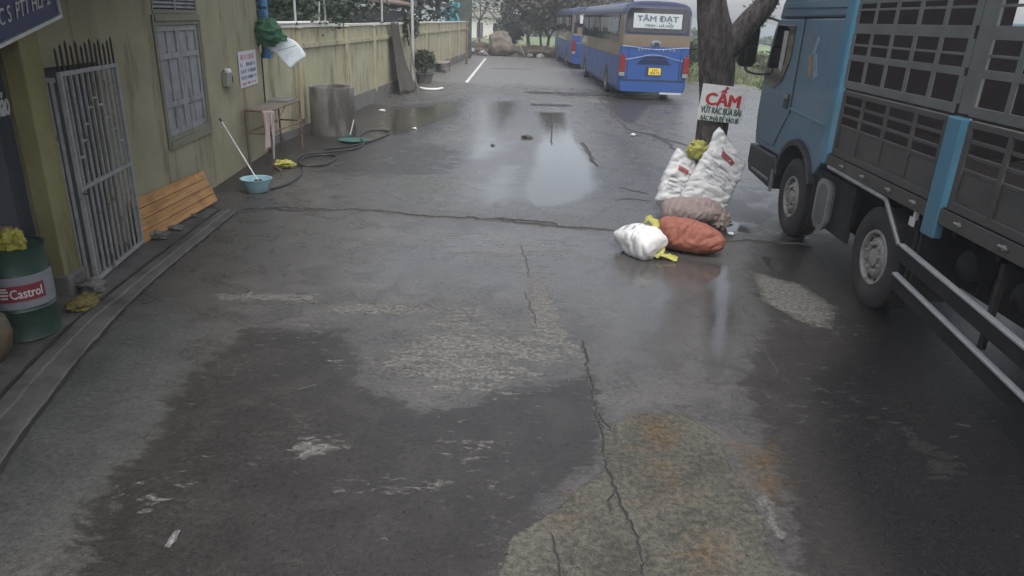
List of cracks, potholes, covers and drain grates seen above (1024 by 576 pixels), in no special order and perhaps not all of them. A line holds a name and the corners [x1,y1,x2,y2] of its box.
crack [580,98,688,166]
crack [580,340,646,576]
crack [551,533,562,576]
